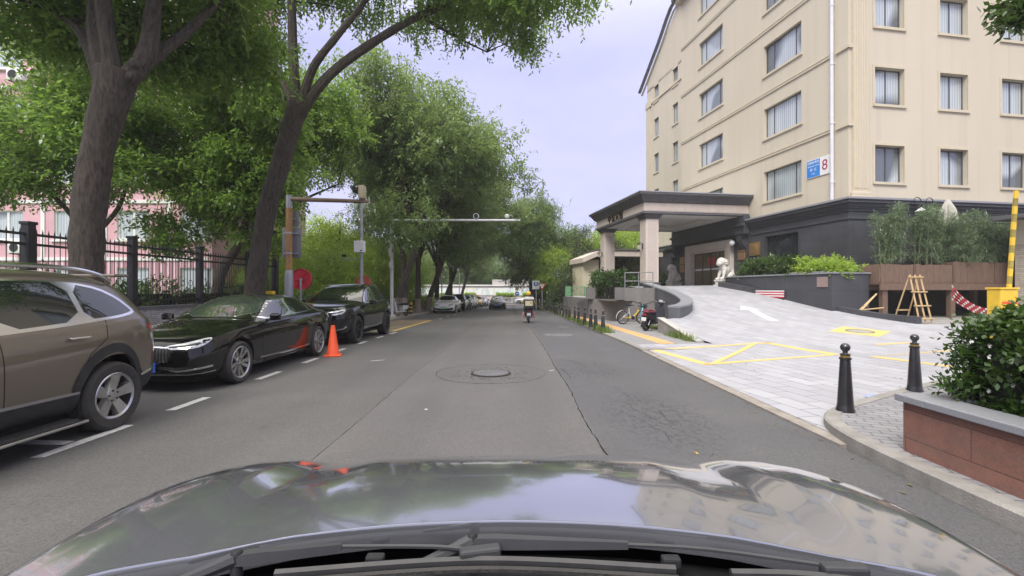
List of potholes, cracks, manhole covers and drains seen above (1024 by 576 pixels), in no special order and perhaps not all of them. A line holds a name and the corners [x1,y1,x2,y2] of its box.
crack [311,308,713,461]
manhole cover [451,367,527,381]
